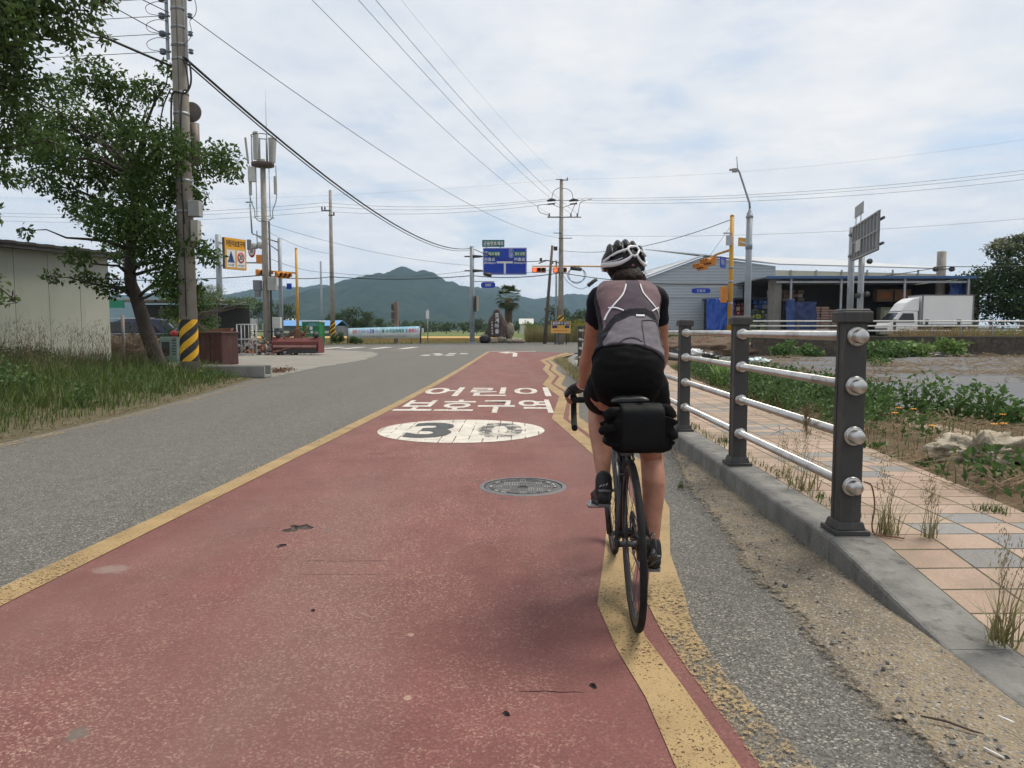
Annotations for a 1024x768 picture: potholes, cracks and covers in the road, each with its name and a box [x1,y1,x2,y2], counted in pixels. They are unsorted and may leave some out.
manhole cover [479,477,567,496]
pothole [282,524,314,532]
